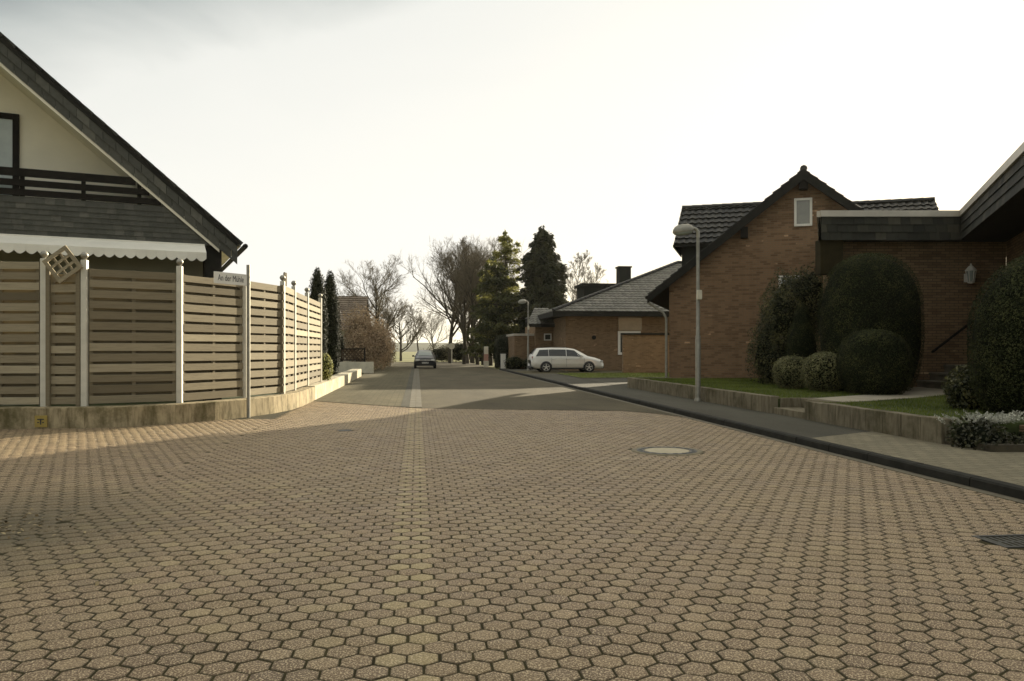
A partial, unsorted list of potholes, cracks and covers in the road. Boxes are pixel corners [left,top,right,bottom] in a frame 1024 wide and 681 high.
manhole cover [631,446,703,456]
drain grate [972,534,1024,548]
